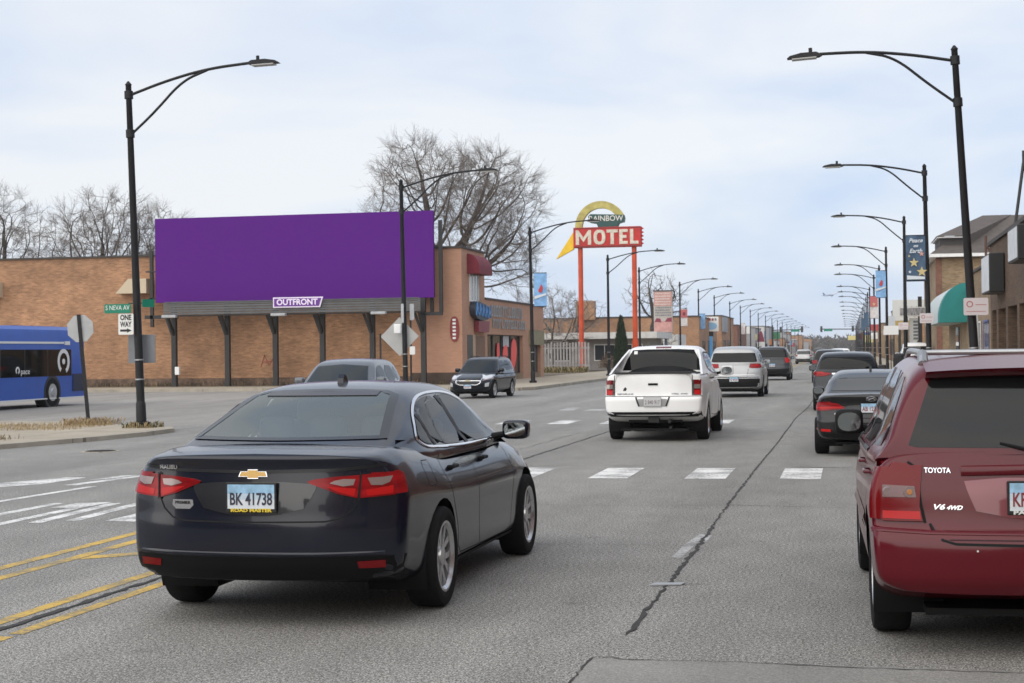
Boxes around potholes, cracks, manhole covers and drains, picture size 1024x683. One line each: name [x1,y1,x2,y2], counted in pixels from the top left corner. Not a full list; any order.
crack [611,400,836,637]
